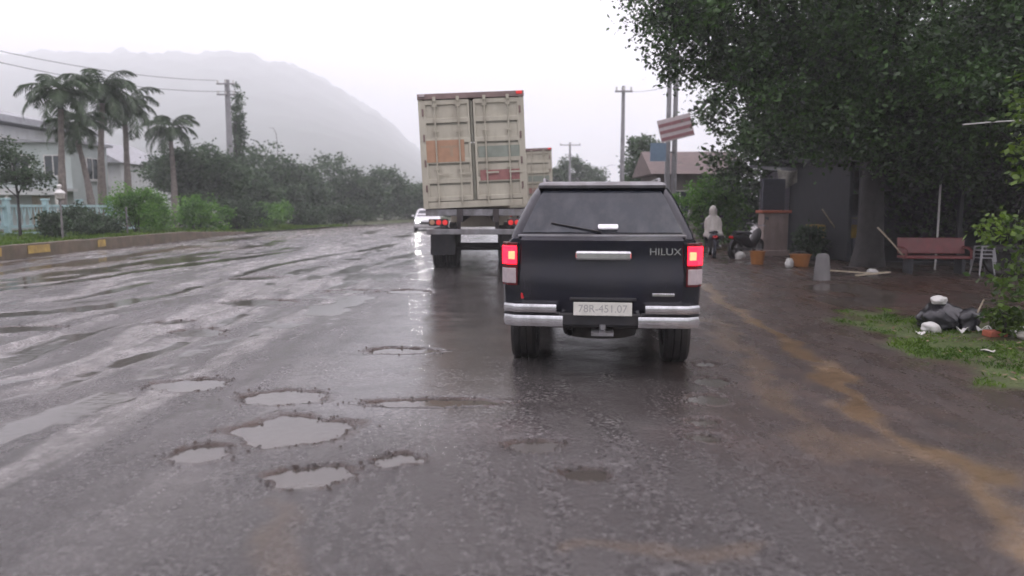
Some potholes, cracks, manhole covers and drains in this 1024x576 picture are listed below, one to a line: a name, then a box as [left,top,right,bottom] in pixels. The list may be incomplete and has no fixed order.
pothole [218,387,341,407]
pothole [337,396,527,408]
pothole [358,449,436,471]
pothole [248,461,371,493]
pothole [549,461,617,485]
pothole [153,439,242,467]
pothole [357,346,452,355]
pothole [131,374,239,395]
pothole [206,409,381,455]
pothole [496,437,569,455]
